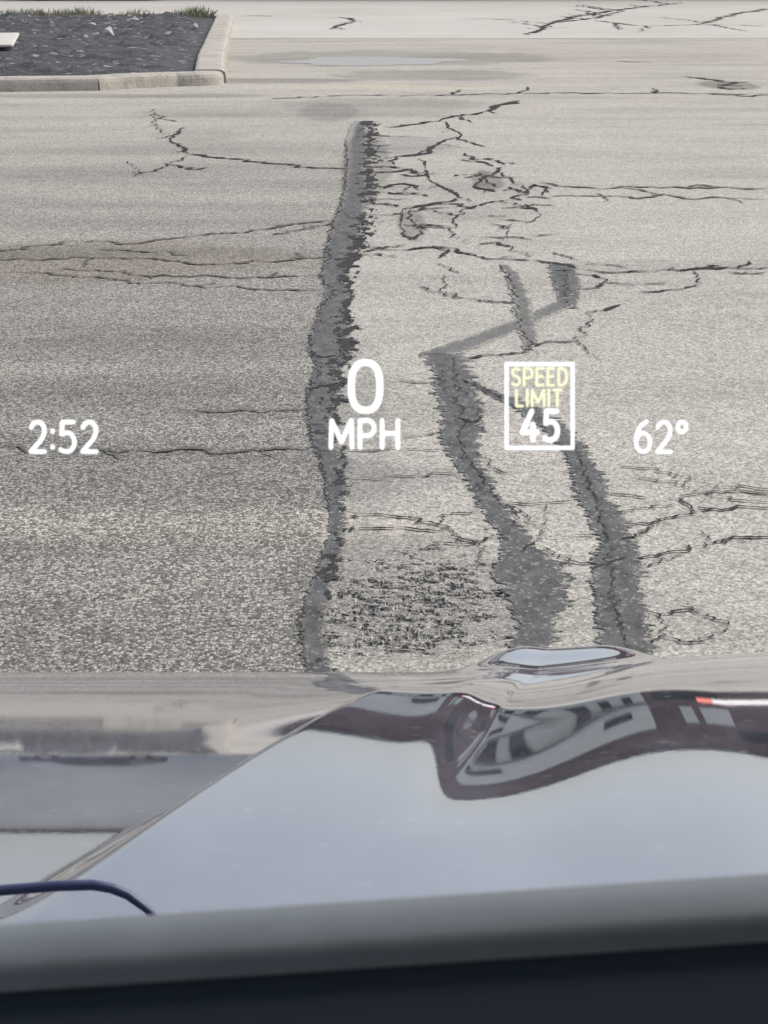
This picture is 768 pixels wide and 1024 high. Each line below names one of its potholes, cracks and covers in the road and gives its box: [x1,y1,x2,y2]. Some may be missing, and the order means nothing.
crack [357,100,768,361]
crack [127,109,346,177]
crack [321,465,768,657]
crack [0,220,331,290]
crack [508,0,768,35]
crack [2,444,300,459]
